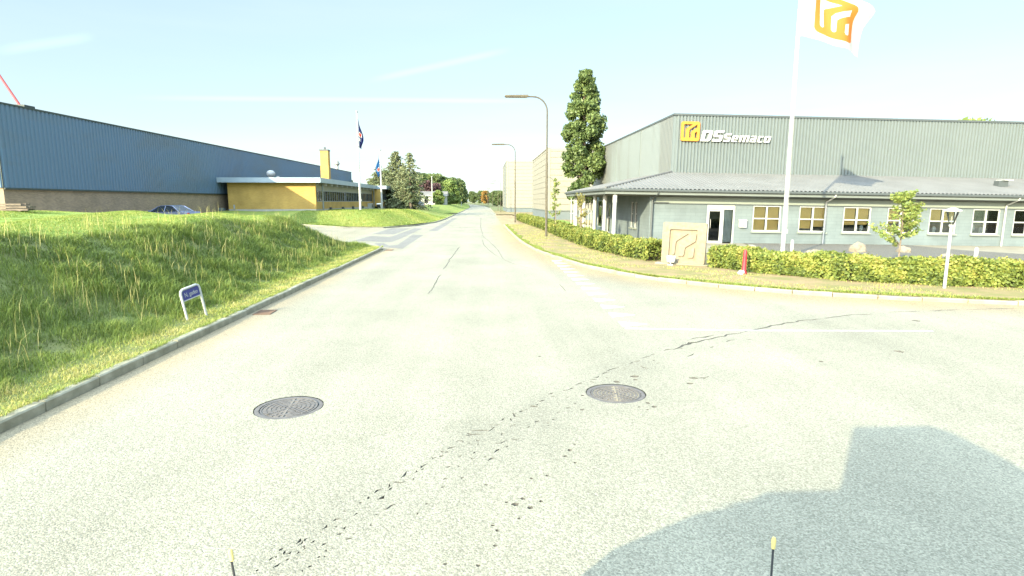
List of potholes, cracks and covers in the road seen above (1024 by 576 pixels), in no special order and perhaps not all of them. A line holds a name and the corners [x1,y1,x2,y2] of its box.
crack [256,308,1017,572]
manhole cover [253,397,324,419]
manhole cover [586,384,646,403]
